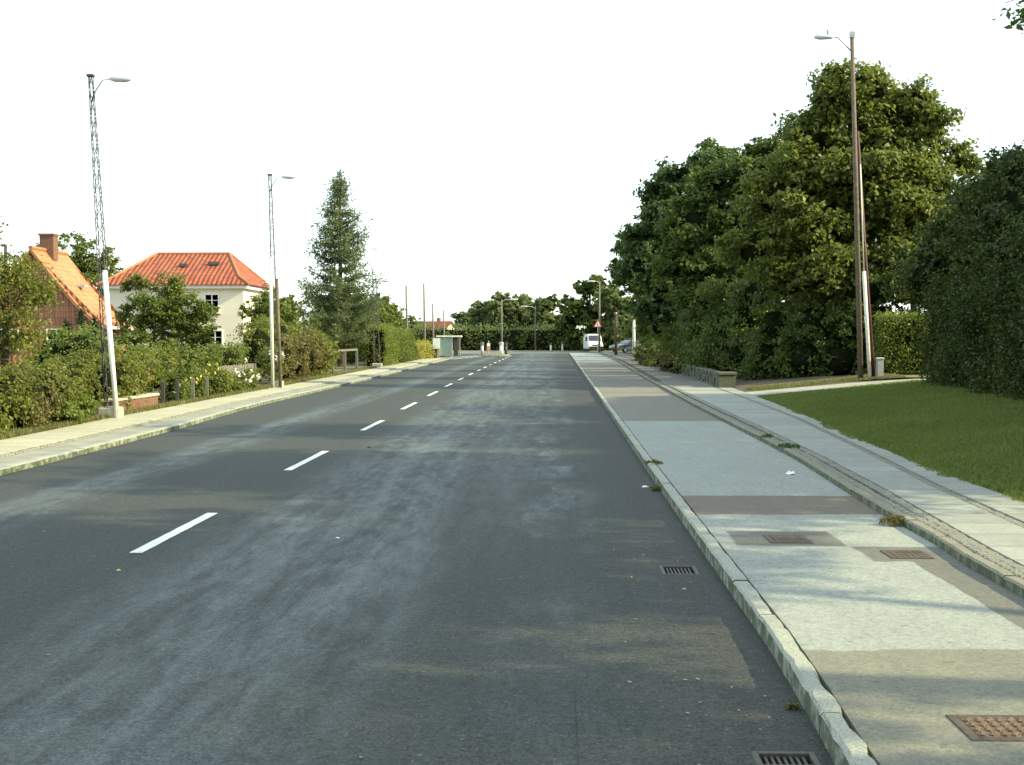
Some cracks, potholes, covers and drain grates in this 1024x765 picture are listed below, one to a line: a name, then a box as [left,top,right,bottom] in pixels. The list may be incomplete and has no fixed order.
drain grate [751,751,822,765]
manhole cover [763,535,813,543]
manhole cover [945,715,1024,742]
manhole cover [880,550,935,559]
drain grate [659,565,700,575]
